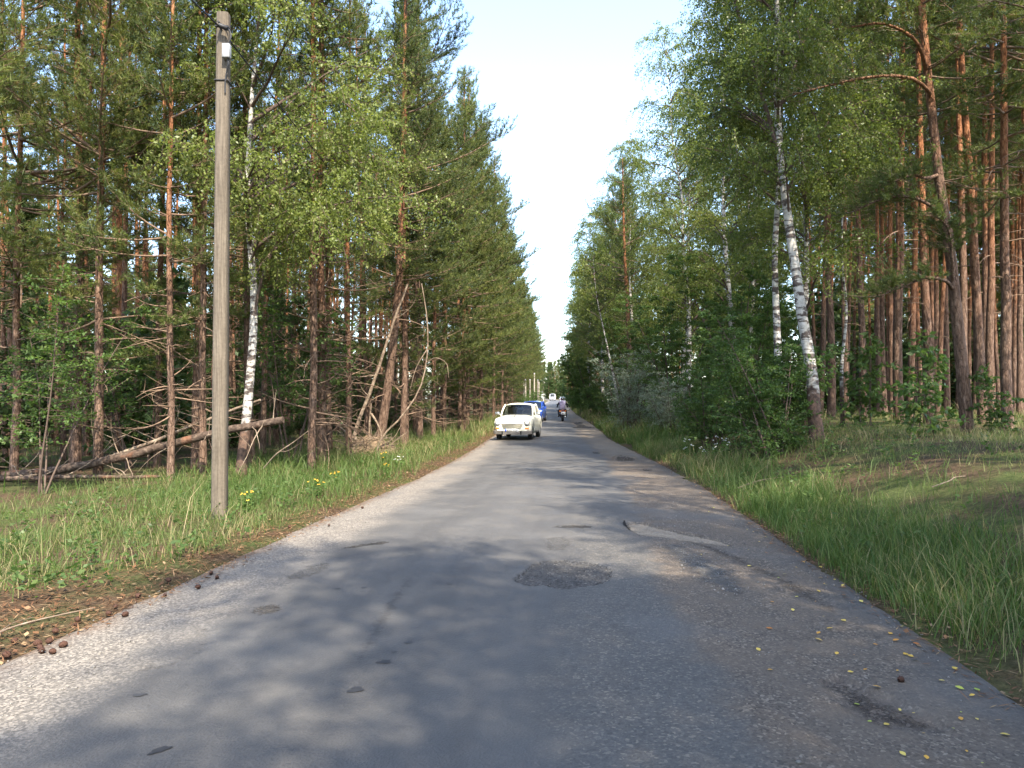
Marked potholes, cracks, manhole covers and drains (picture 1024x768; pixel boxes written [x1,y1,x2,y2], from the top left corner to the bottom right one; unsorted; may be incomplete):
pothole [847,690,928,728]
pothole [515,560,612,589]
